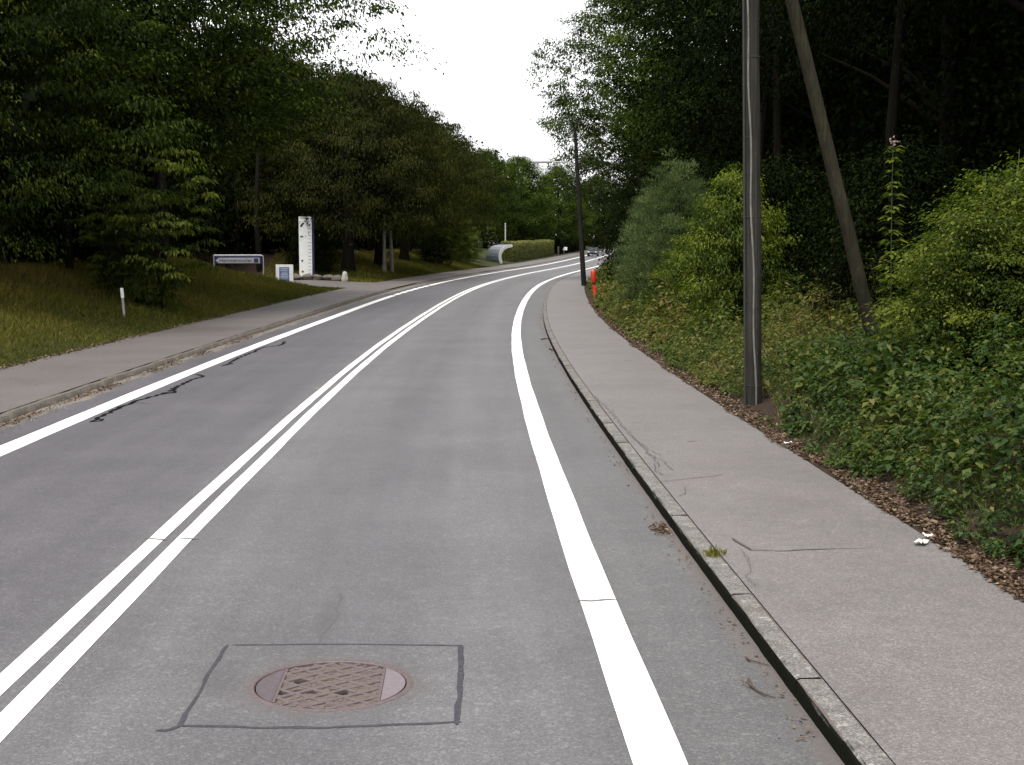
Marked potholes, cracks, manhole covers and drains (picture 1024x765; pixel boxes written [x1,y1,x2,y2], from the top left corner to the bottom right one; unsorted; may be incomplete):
manhole cover [248,660,413,712]
crack [732,537,874,586]
crack [222,341,286,366]
crack [595,396,722,495]
crack [84,374,204,422]
crack [318,593,343,644]
